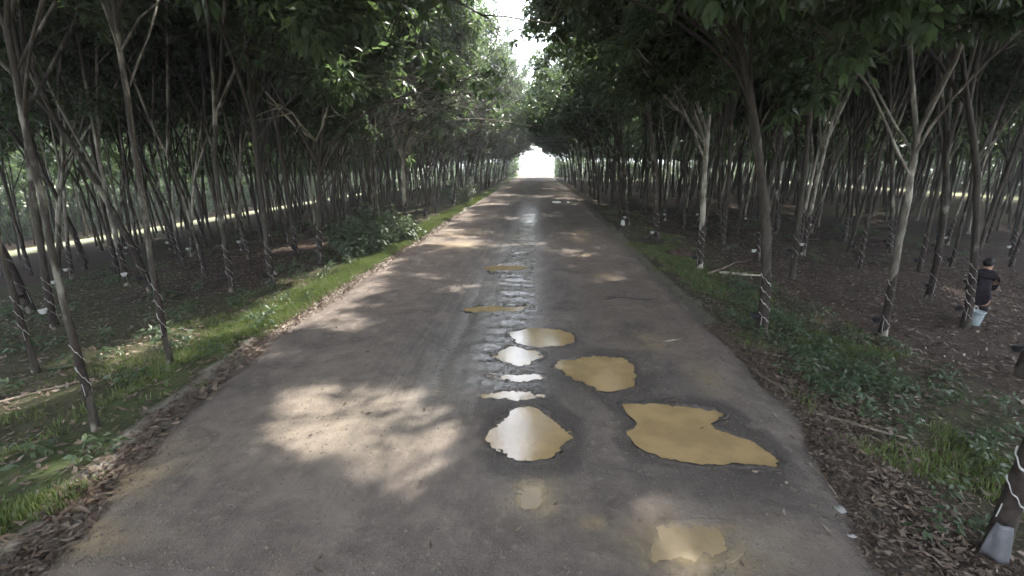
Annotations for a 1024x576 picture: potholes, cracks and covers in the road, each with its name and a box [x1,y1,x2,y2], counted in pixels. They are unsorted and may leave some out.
pothole [480,264,534,272]
pothole [508,477,557,519]
pothole [615,400,797,472]
pothole [546,354,641,395]
pothole [504,325,581,350]
pothole [458,304,535,314]
pothole [479,402,581,466]
pothole [489,343,548,368]
pothole [480,370,553,384]
pothole [470,388,555,403]
pothole [636,517,746,571]
